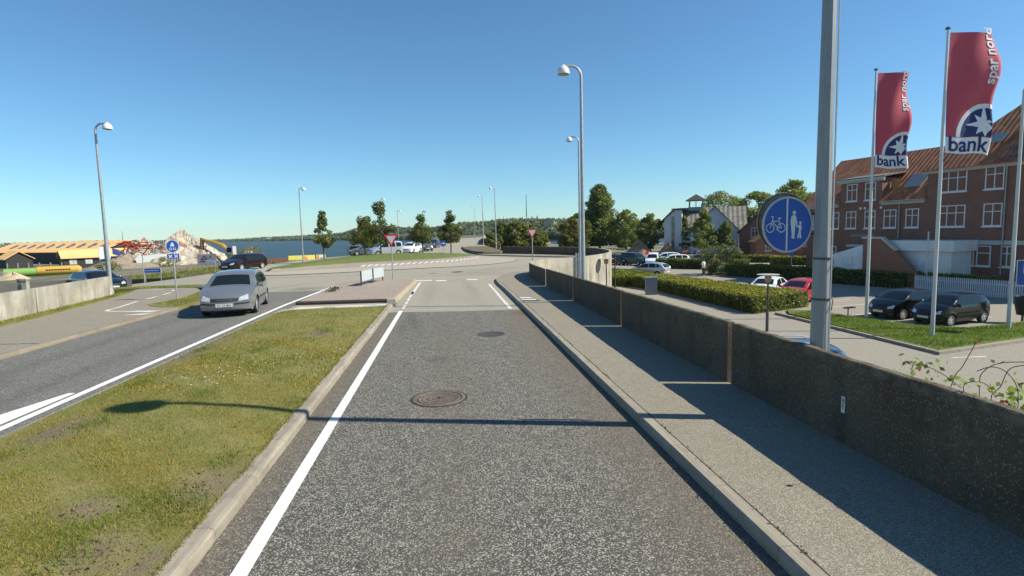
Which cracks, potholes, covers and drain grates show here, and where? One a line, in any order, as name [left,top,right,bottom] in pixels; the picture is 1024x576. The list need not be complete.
manhole cover [411,390,468,407]
